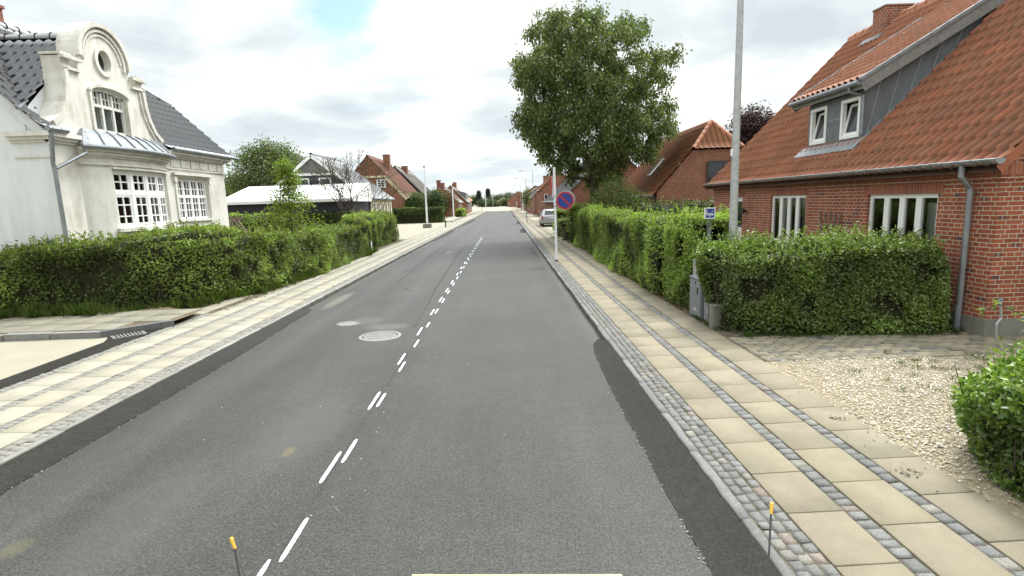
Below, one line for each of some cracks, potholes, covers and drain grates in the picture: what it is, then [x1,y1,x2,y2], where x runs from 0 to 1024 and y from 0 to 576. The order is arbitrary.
manhole cover [358,331,402,342]
drain grate [110,330,147,339]
